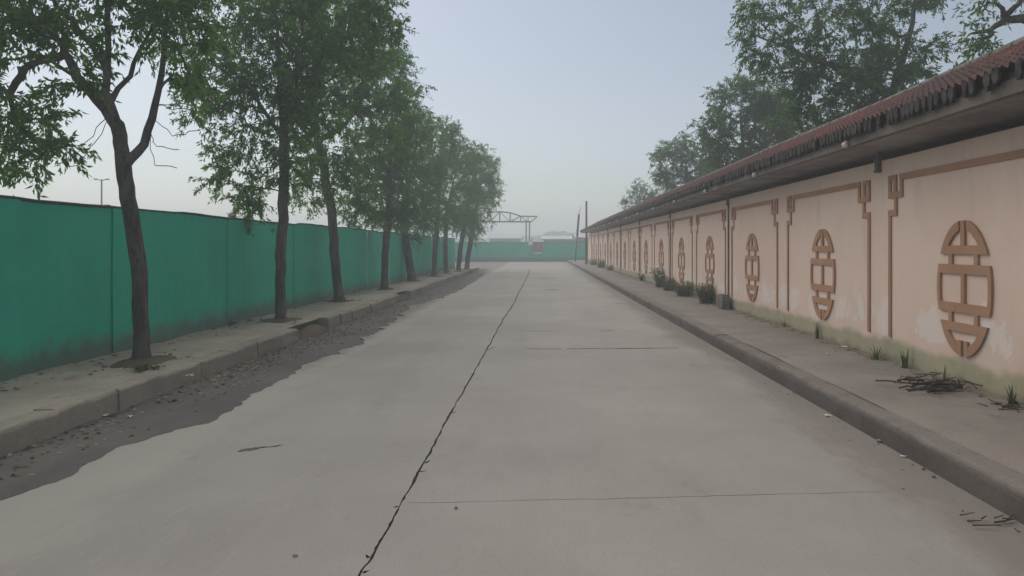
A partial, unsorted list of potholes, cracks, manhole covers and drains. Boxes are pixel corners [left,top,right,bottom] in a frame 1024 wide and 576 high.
crack [358,269,844,576]
